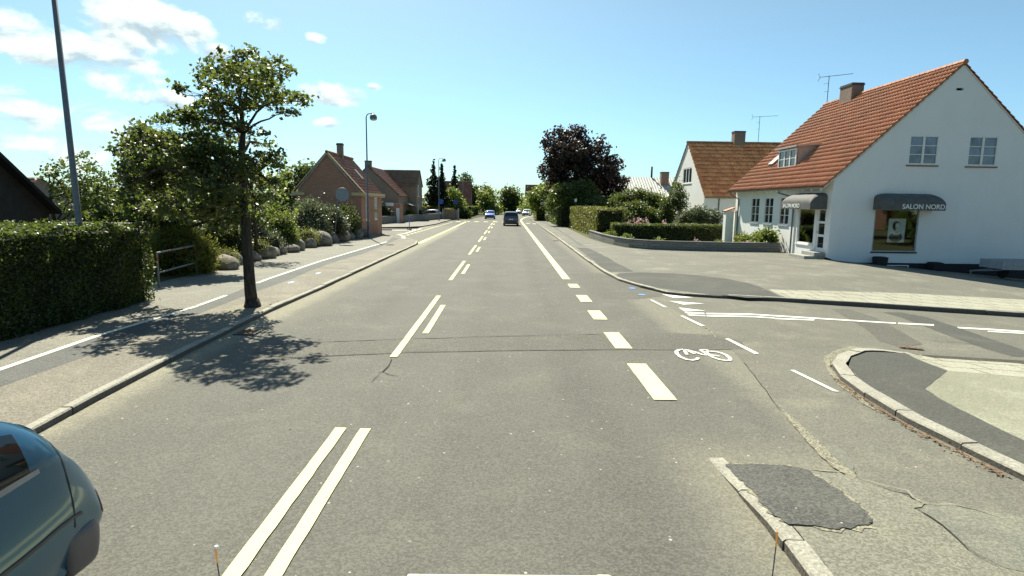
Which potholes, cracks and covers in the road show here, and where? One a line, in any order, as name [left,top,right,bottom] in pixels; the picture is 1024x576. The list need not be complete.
crack [294,334,598,380]
crack [814,469,993,557]
